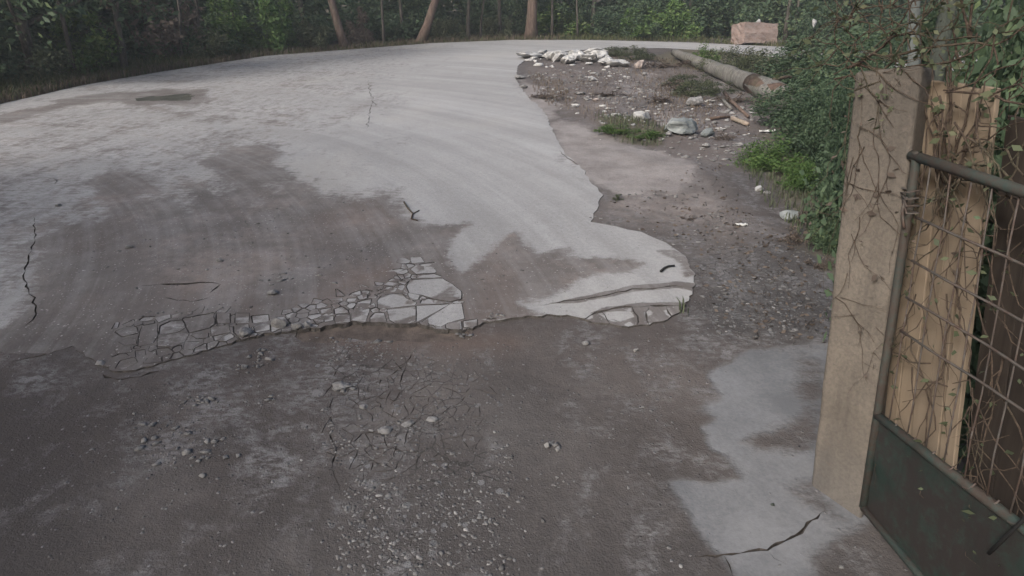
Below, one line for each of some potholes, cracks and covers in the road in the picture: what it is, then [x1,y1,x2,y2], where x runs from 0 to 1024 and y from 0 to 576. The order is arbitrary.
crack [9,213,37,331]
crack [694,510,825,576]
crack [307,346,497,488]
crack [539,286,679,324]
crack [103,257,497,380]
